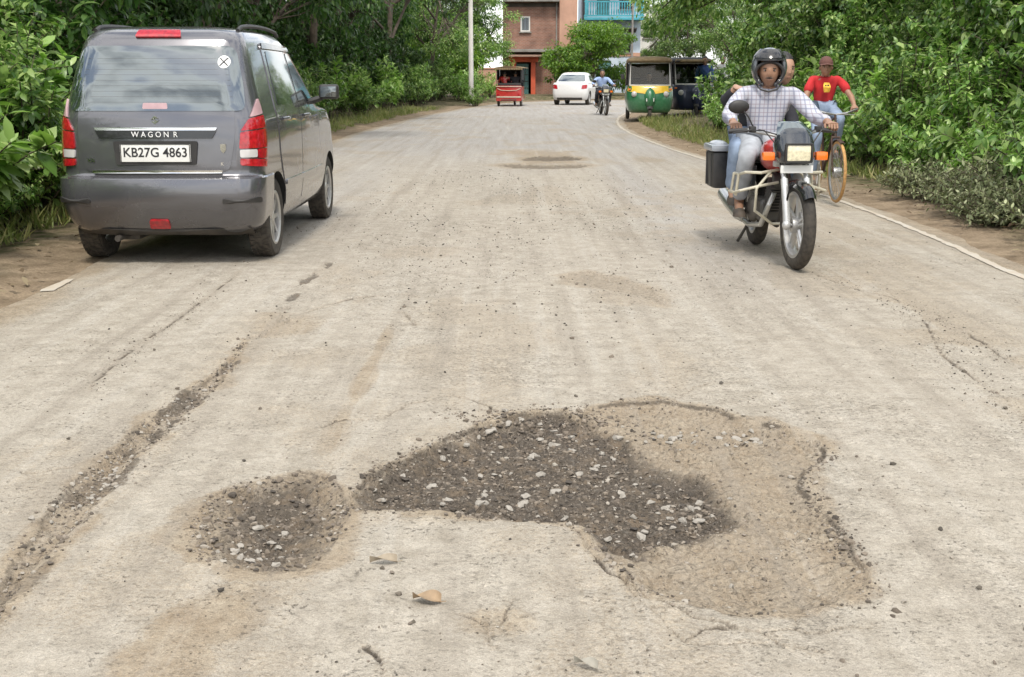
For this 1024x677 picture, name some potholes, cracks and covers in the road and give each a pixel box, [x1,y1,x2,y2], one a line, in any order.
crack [0,261,421,619]
crack [453,601,514,646]
pothole [185,469,356,576]
crack [803,267,1024,421]
pothole [348,398,875,617]
